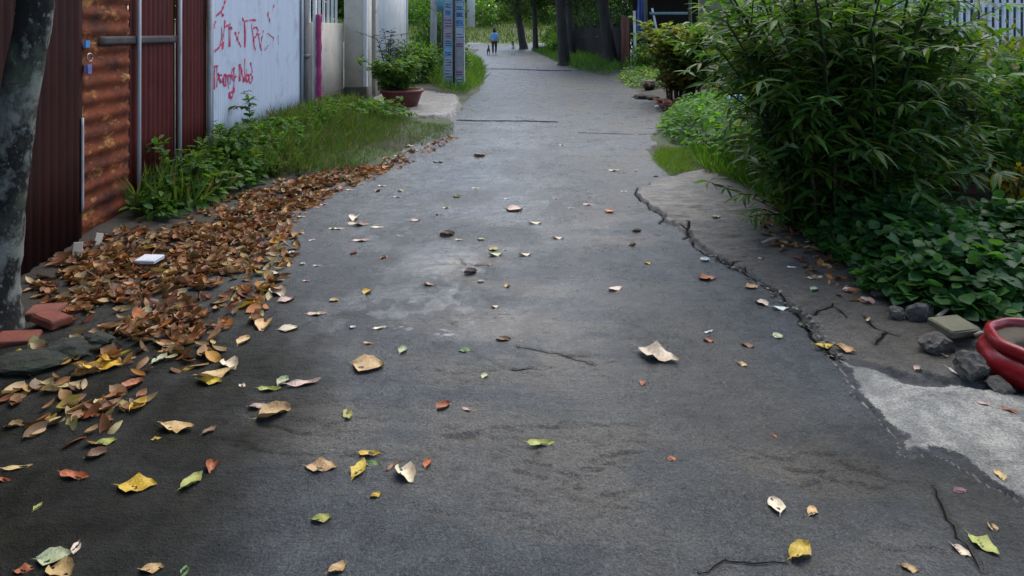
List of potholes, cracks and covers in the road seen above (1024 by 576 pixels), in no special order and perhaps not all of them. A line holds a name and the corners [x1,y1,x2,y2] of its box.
crack [634,188,898,360]
crack [511,347,594,371]
crack [697,559,788,574]
crack [931,484,981,572]
